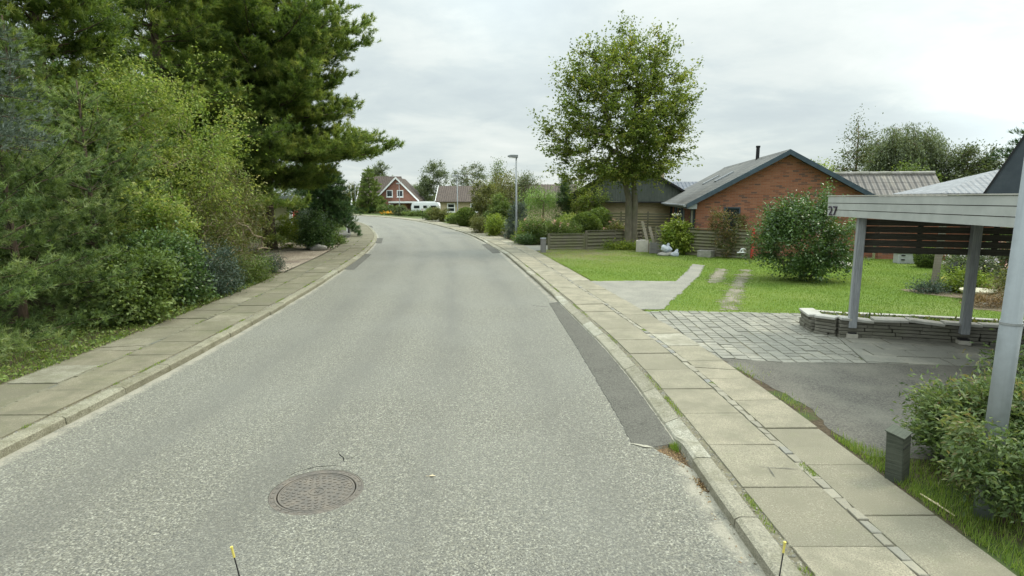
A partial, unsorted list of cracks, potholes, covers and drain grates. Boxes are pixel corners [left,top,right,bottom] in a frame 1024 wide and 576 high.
manhole cover [268,470,364,515]
